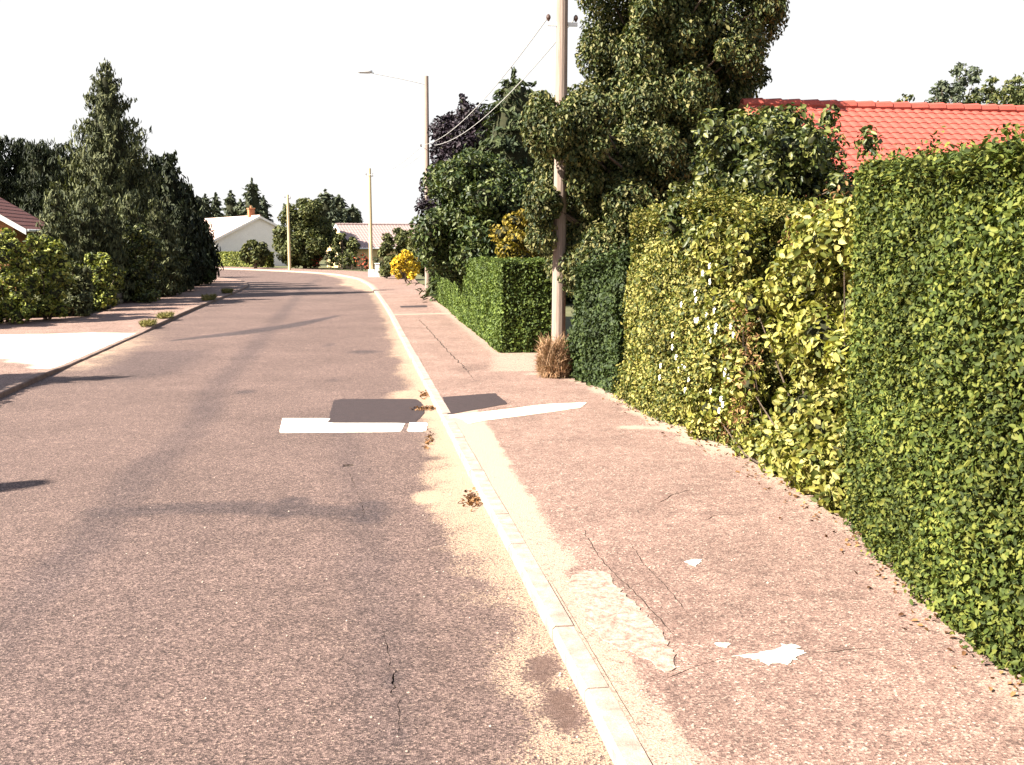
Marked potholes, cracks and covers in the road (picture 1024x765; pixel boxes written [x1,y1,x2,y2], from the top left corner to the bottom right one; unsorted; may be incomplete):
crack [382,629,400,738]
crack [418,318,474,380]
crack [581,524,688,643]
